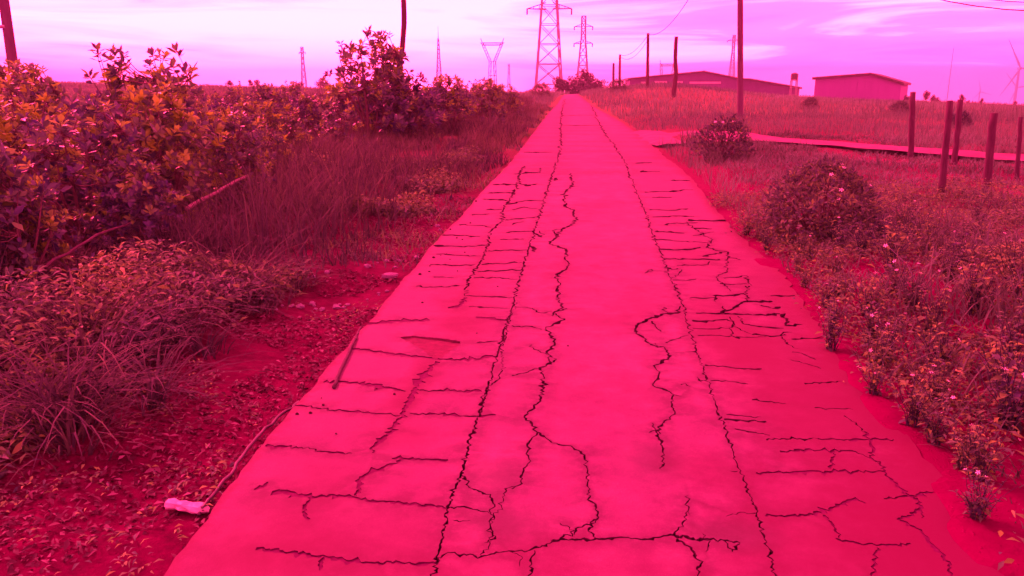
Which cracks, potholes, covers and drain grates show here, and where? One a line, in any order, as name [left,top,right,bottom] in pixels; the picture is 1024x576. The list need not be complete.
crack [254,99,953,576]
